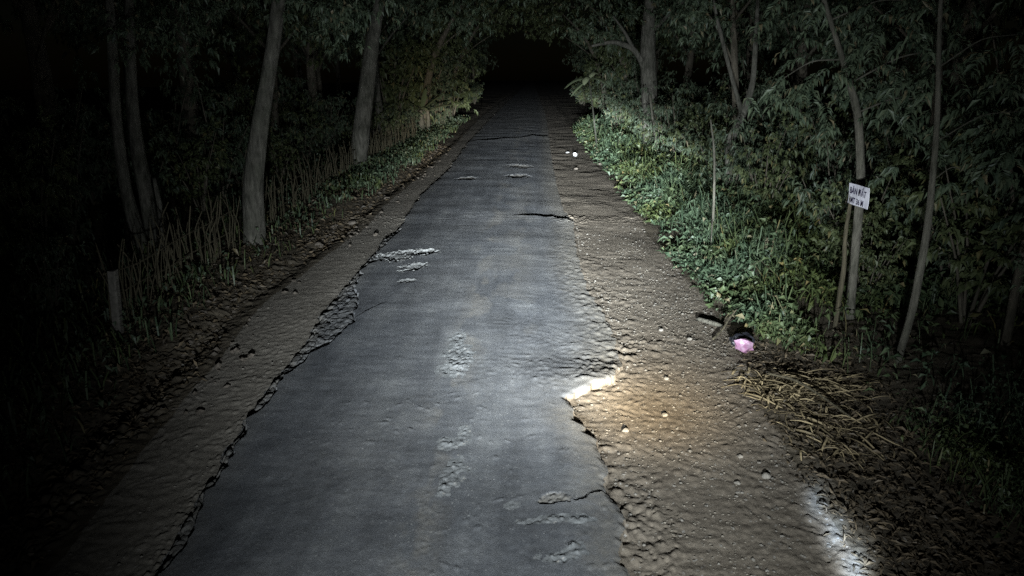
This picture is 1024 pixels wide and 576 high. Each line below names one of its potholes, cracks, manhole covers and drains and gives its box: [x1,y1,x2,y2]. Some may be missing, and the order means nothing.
crack [156,229,401,576]
pothole [435,454,473,498]
pothole [537,491,576,504]
pothole [370,248,441,263]
pothole [515,513,598,525]
crack [573,490,606,501]
pothole [434,332,477,379]
pothole [436,425,474,451]
pothole [533,540,590,563]
pothole [396,262,430,272]
